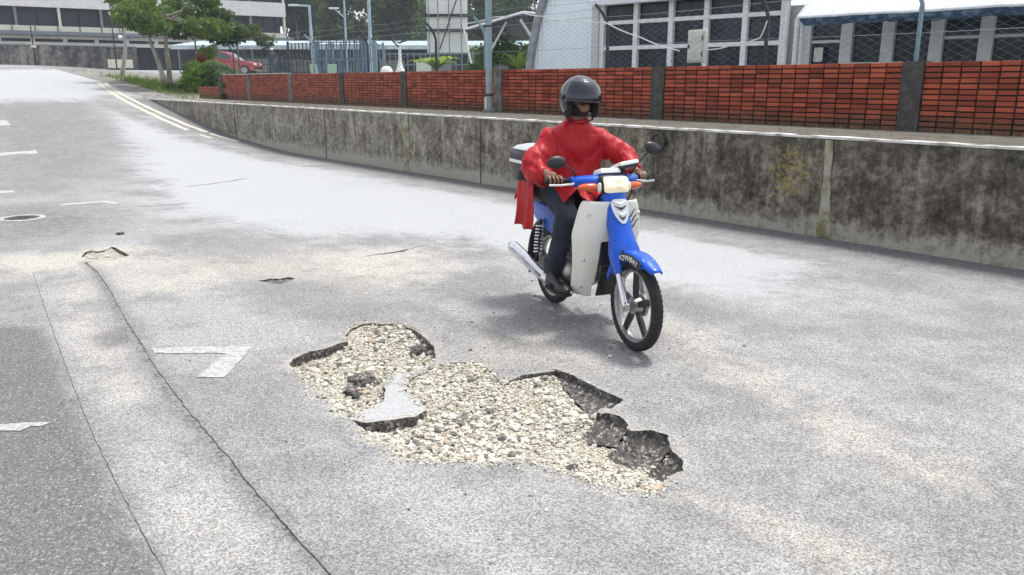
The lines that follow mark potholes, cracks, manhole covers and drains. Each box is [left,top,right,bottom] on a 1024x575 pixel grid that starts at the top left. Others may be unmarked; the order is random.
manhole cover [0,214,46,222]
pothole [81,247,129,261]
pothole [289,323,436,414]
pothole [648,452,684,482]
